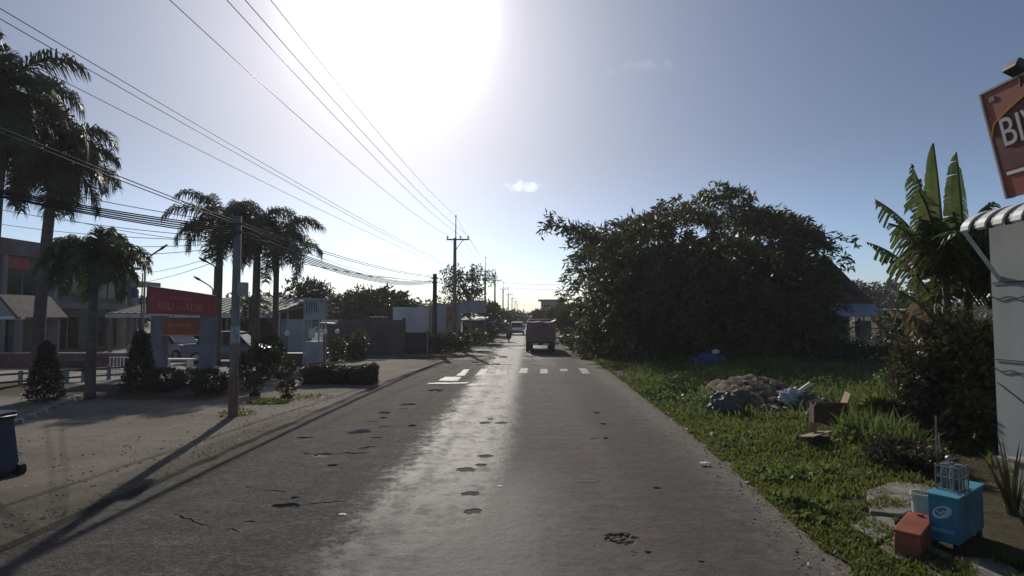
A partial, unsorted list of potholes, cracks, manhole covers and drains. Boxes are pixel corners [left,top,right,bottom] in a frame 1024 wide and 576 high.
crack [176,514,255,533]
pothole [604,532,641,546]
